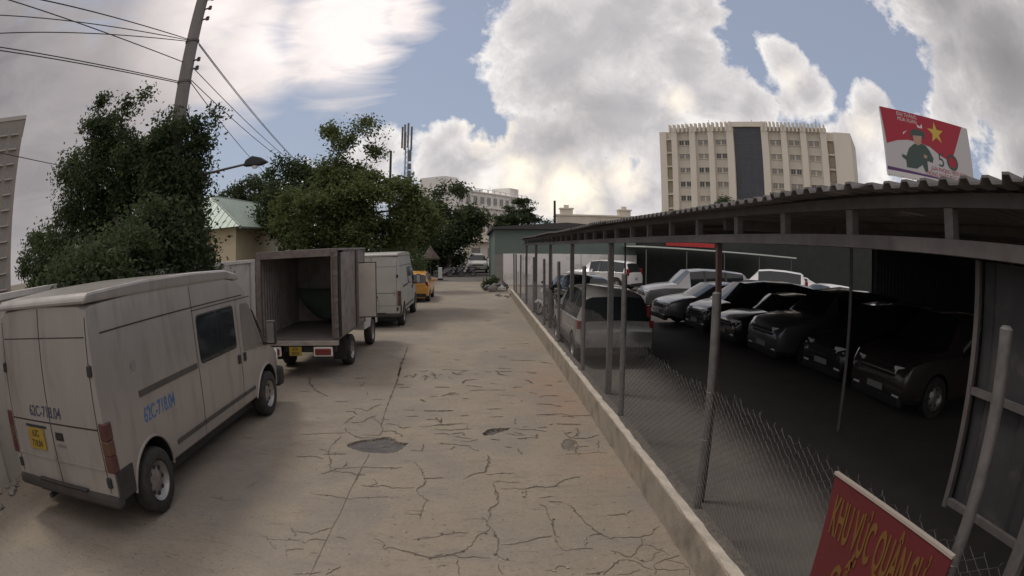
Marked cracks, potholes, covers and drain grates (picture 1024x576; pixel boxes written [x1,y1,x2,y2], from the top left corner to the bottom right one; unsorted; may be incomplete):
crack [260,329,690,576]
pothole [561,438,576,451]
pothole [347,437,408,454]
